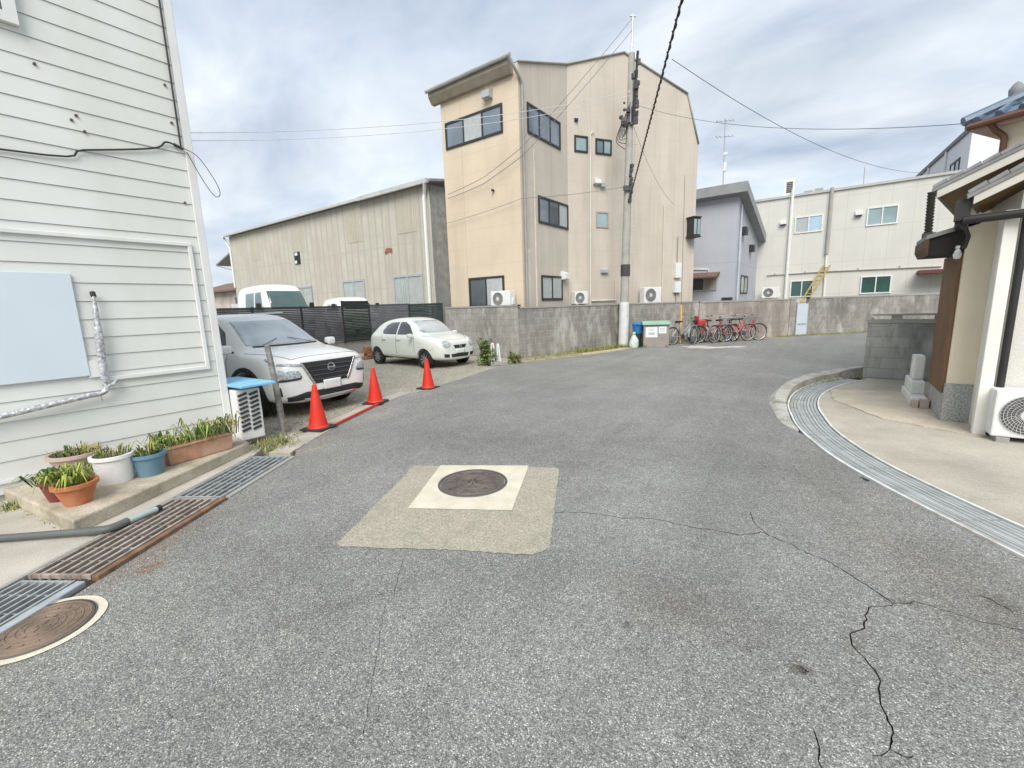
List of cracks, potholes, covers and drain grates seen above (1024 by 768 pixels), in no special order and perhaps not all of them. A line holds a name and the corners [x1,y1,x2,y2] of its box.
crack [555,512,1022,758]
manhole cover [0,595,108,665]
manhole cover [438,469,507,497]
crack [813,729,822,768]
drain grate [787,377,1024,560]
drain grate [0,456,295,634]
crack [363,561,403,735]
